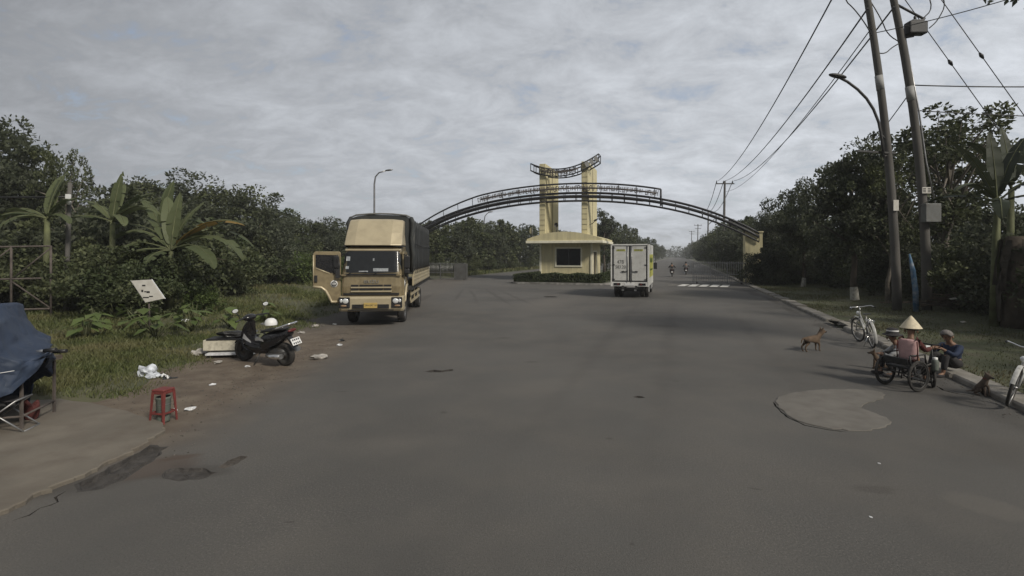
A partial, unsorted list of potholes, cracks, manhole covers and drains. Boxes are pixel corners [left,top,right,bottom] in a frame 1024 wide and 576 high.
pothole [218,456,247,469]
crack [15,491,66,520]
pothole [74,445,169,493]
pothole [162,468,218,481]
